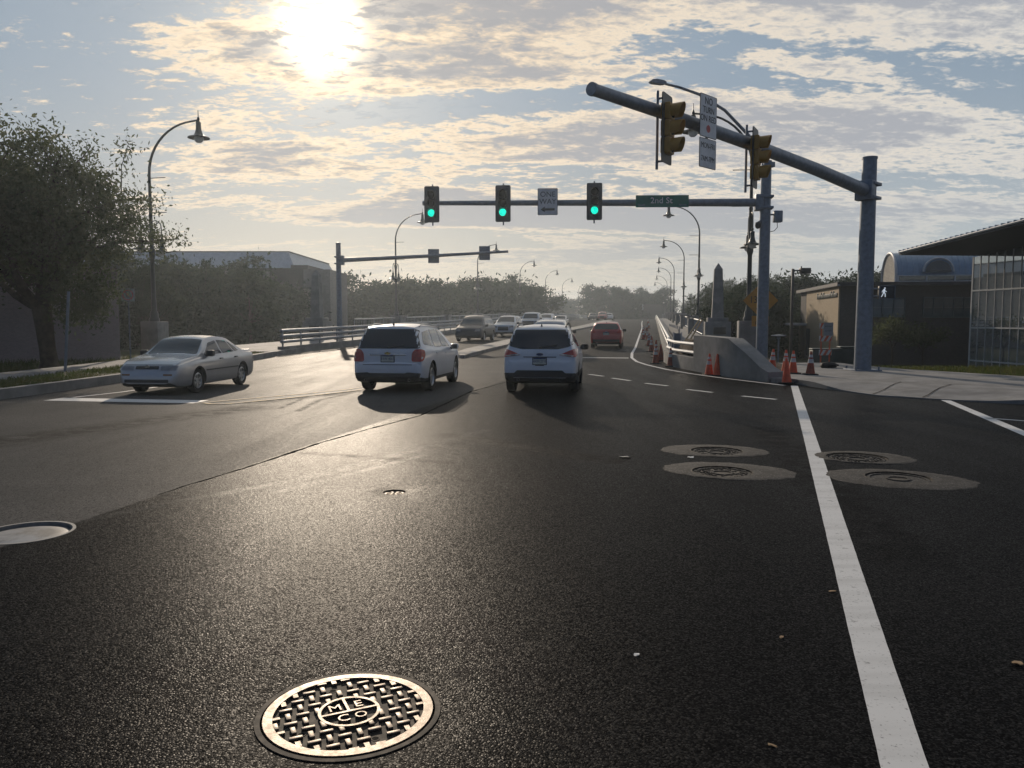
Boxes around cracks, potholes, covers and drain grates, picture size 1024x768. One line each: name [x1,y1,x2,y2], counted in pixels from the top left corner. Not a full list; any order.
manhole cover [815,451,917,465]
manhole cover [254,671,440,763]
manhole cover [826,469,981,490]
manhole cover [661,444,770,457]
manhole cover [0,521,76,545]
manhole cover [663,462,797,481]
